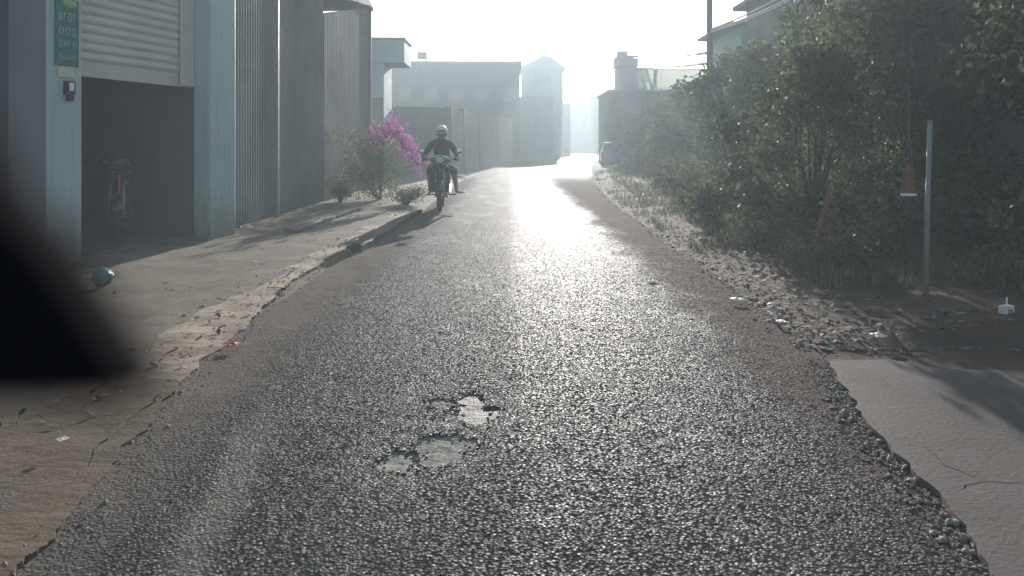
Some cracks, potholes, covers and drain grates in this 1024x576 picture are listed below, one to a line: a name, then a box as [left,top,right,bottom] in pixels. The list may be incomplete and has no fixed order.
pothole [372,447,422,475]
pothole [423,396,458,415]
pothole [451,388,506,428]
crack [929,450,1024,490]
pothole [406,429,487,471]
